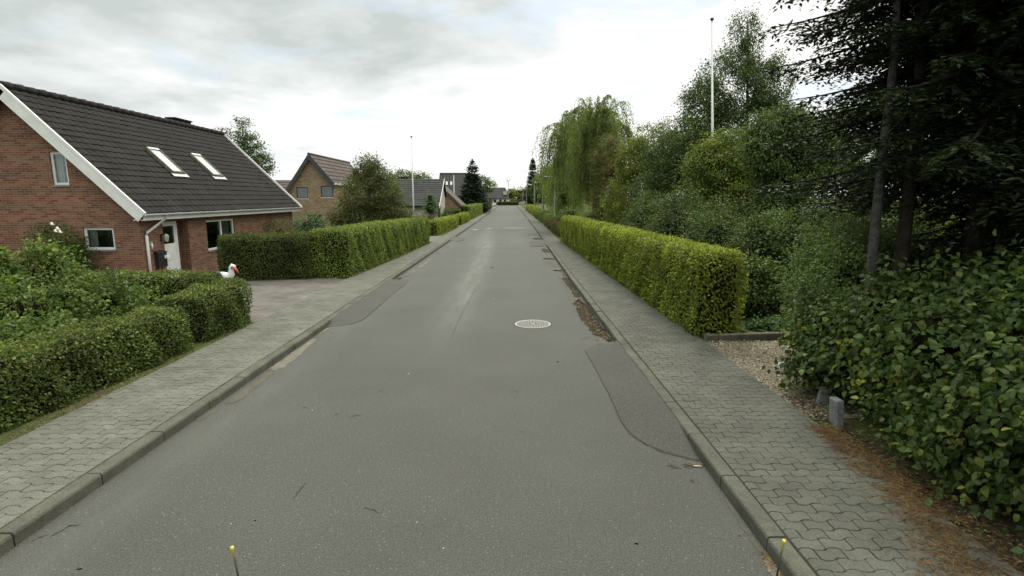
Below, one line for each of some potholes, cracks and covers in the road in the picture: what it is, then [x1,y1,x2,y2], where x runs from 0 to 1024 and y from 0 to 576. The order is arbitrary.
manhole cover [514,320,552,329]
